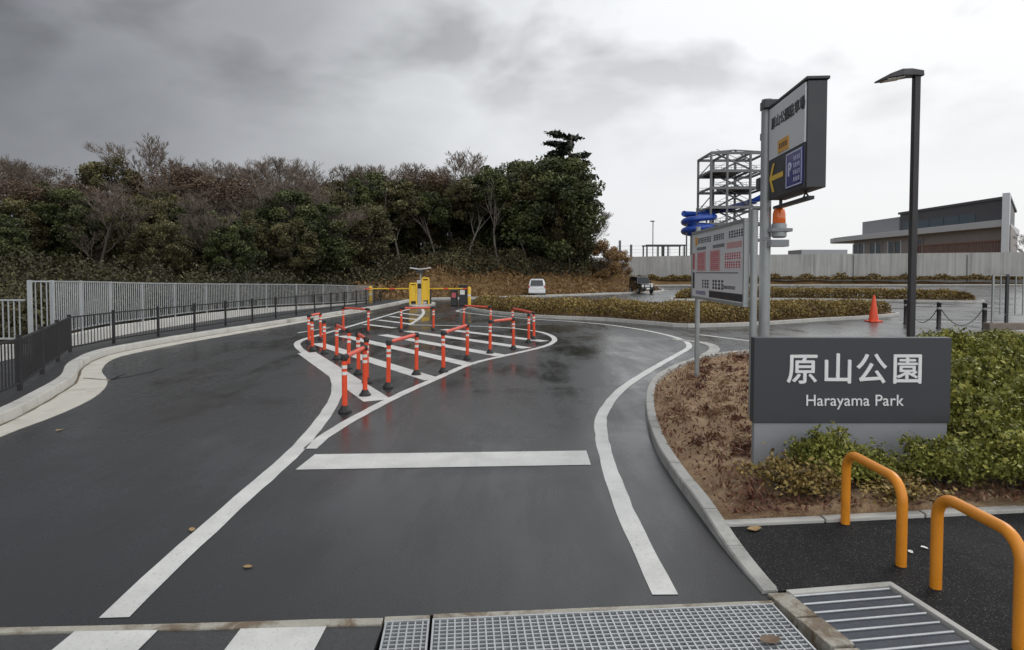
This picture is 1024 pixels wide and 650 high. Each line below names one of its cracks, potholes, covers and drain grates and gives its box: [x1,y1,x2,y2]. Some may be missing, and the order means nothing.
drain grate [786,582,998,650]
drain grate [379,619,430,650]
drain grate [430,603,816,650]
